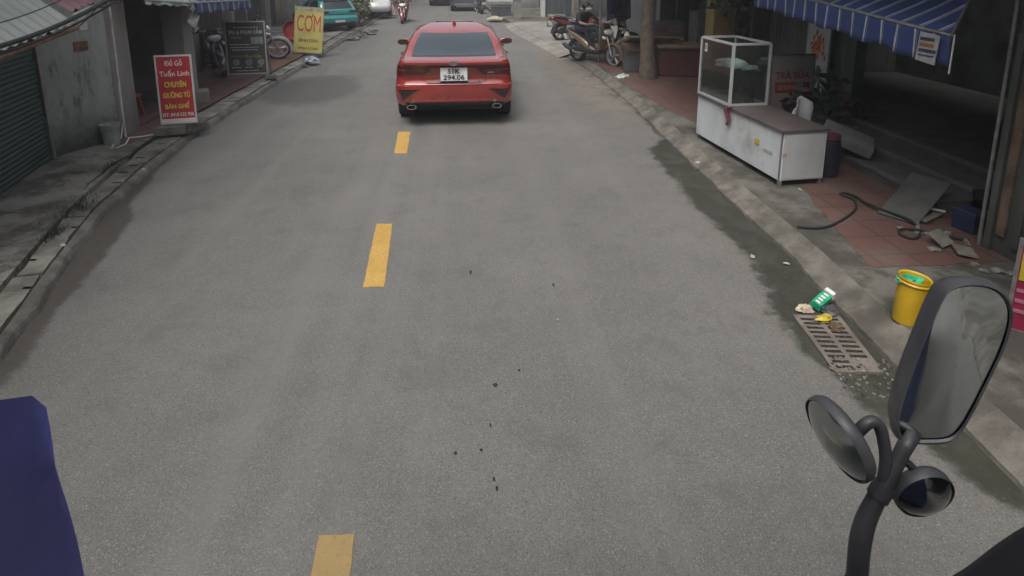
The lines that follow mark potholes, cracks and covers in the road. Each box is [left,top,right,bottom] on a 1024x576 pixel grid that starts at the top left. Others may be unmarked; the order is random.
drain grate [793,315,884,374]
